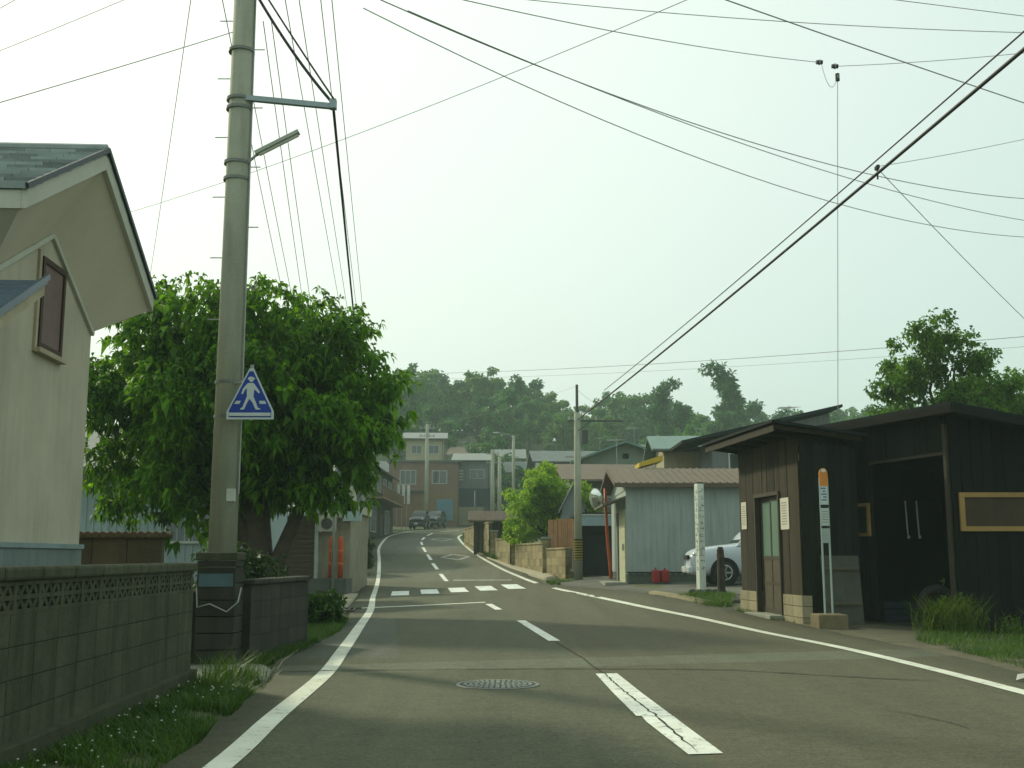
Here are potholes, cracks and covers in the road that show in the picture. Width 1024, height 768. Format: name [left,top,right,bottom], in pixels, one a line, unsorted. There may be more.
manhole cover [456,679,540,690]
